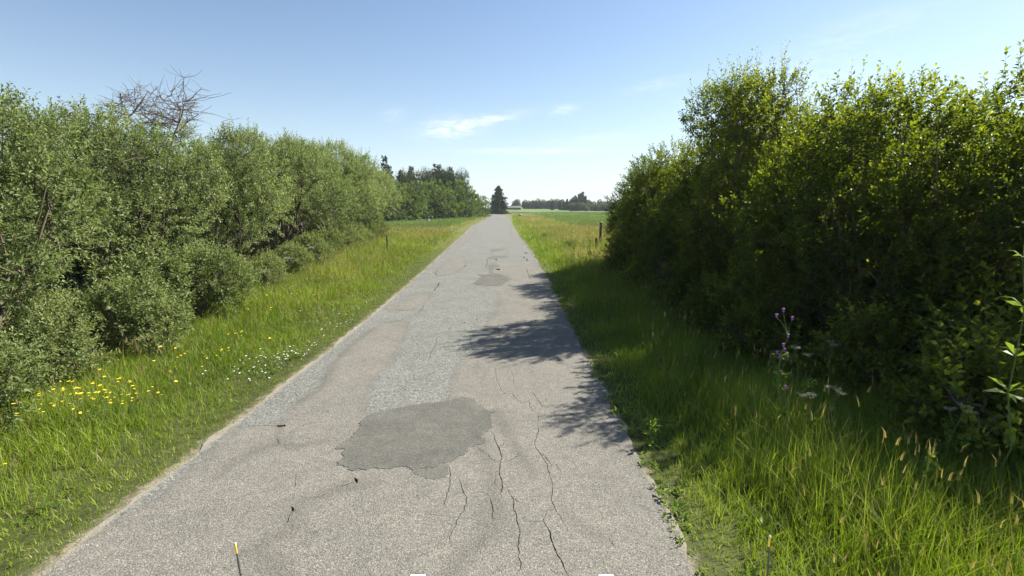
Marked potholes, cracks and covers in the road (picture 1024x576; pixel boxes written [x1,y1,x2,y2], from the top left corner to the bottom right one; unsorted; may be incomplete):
crack [427,369,569,576]
